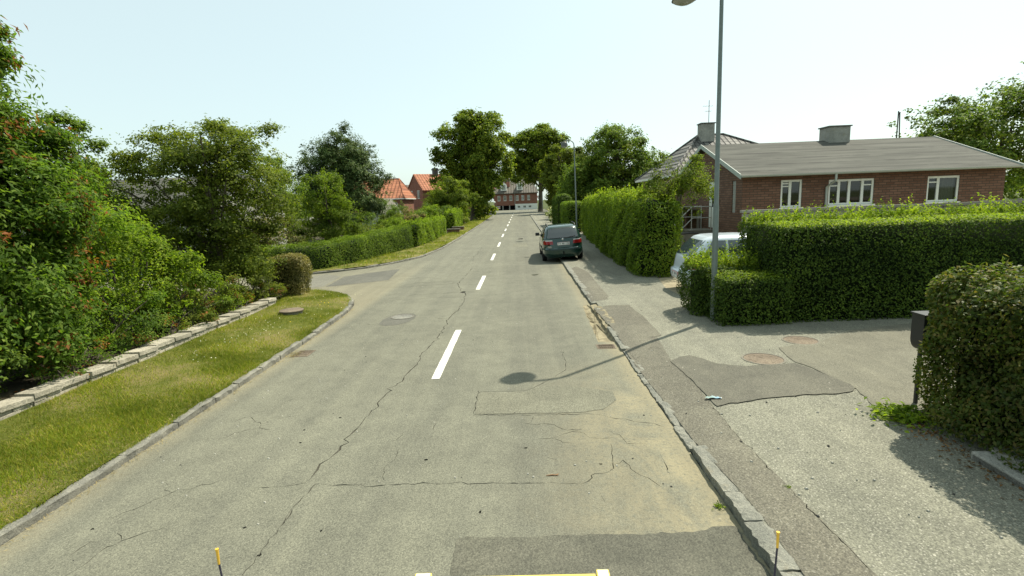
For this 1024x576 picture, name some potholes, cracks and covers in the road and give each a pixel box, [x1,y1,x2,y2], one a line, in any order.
manhole cover [741,353,786,365]
crack [242,250,669,575]
manhole cover [781,336,820,345]
manhole cover [279,307,304,315]
